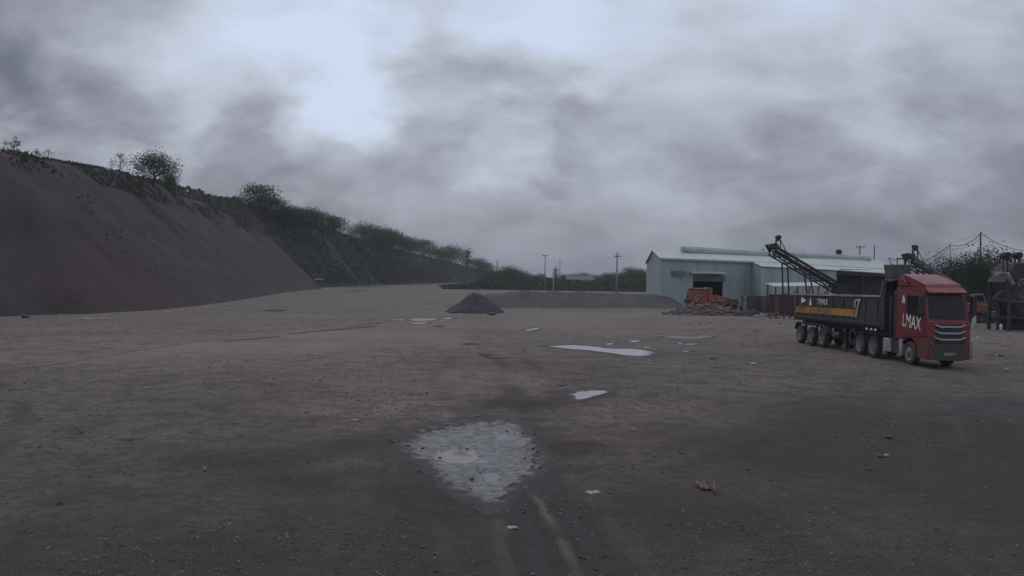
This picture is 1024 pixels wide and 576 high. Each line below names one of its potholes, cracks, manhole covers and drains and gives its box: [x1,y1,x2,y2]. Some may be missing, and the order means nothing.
pothole [391,416,553,515]
pothole [565,388,615,402]
